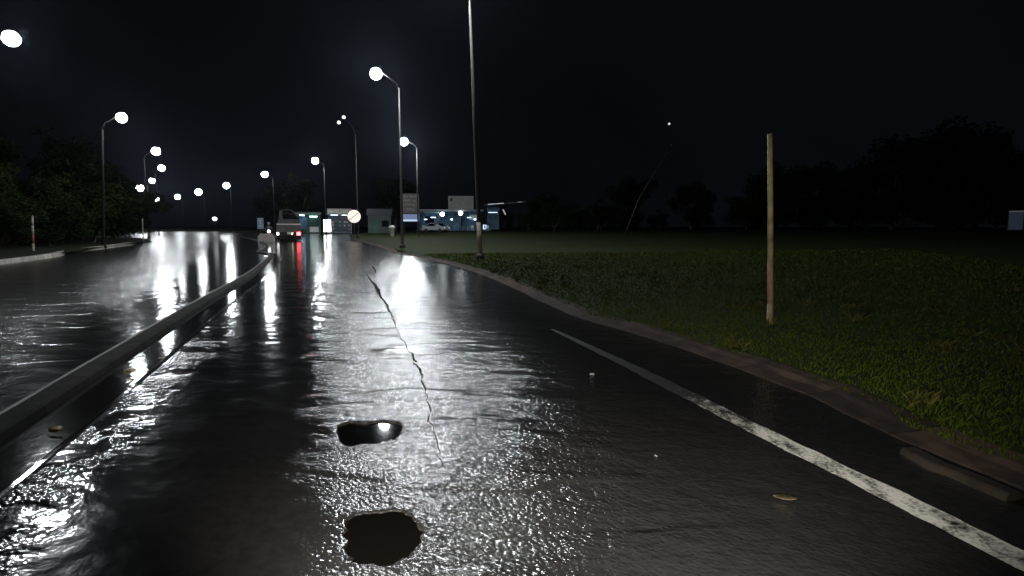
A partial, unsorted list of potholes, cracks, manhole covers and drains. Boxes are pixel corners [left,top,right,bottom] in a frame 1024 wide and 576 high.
pothole [329,418,409,450]
pothole [332,504,433,574]
crack [352,266,443,465]
